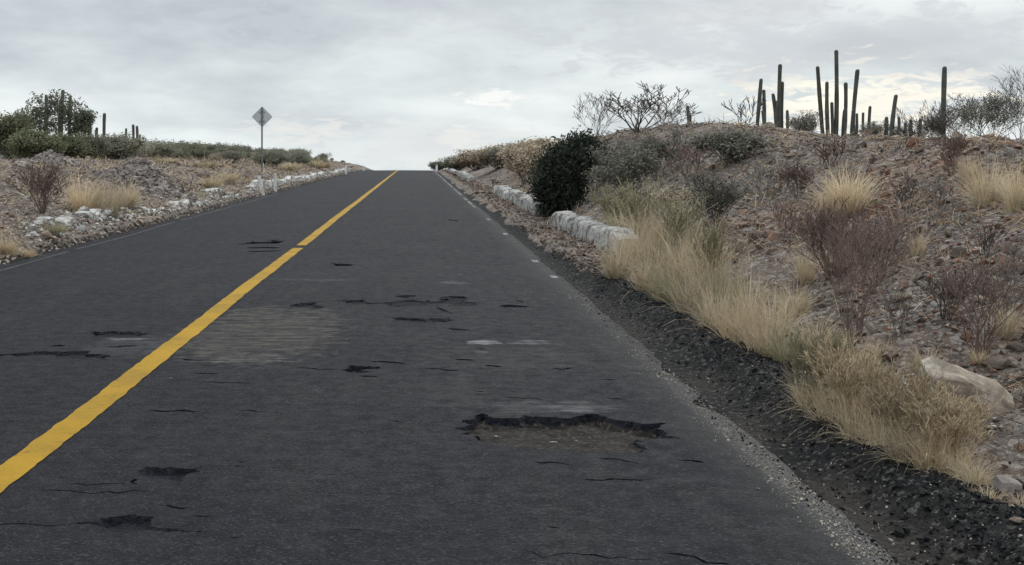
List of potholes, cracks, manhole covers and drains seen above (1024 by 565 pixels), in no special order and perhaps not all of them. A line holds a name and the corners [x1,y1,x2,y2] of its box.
pothole [130,466,202,486]
crack [52,483,208,517]
pothole [455,413,679,456]
crack [538,457,650,481]
